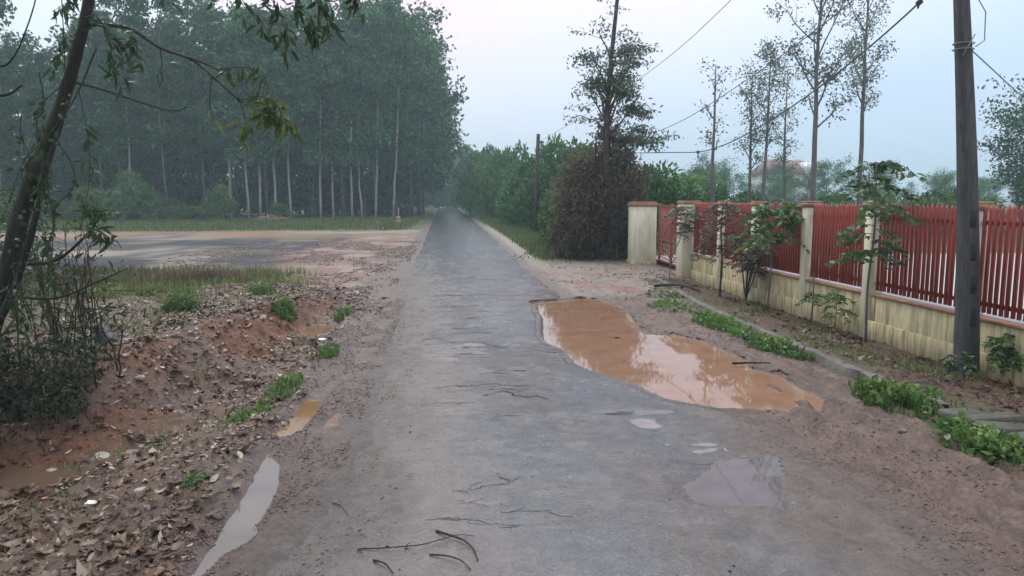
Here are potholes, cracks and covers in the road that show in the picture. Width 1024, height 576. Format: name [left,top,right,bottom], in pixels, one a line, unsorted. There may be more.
pothole [522,296,840,420]
crack [439,370,548,418]
crack [428,476,569,528]
